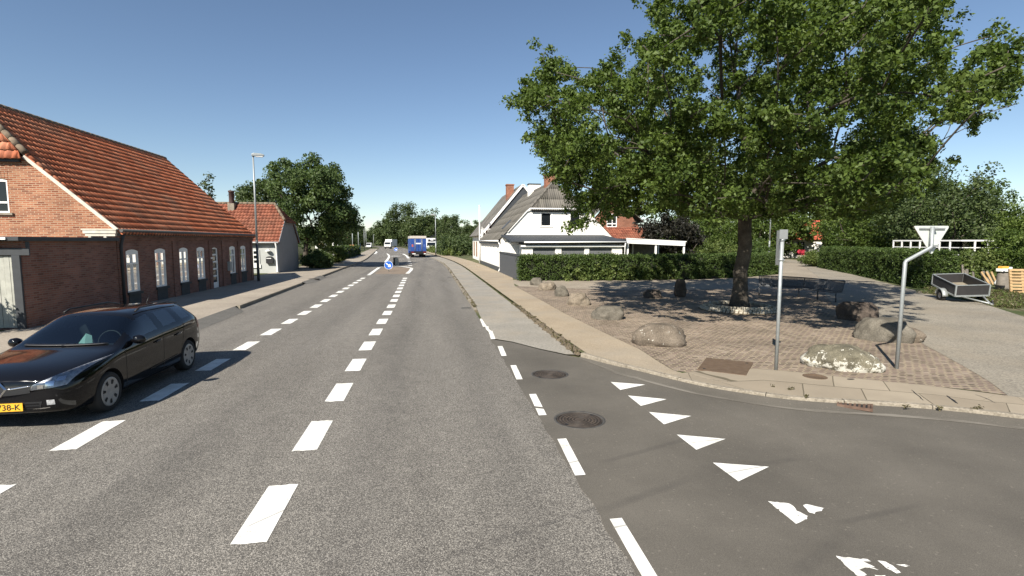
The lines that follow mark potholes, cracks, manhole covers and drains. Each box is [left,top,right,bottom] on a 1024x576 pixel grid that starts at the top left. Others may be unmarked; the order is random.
manhole cover [554,411,606,429]
drain grate [837,402,873,412]
manhole cover [531,370,568,379]
utility cover [697,358,753,376]
